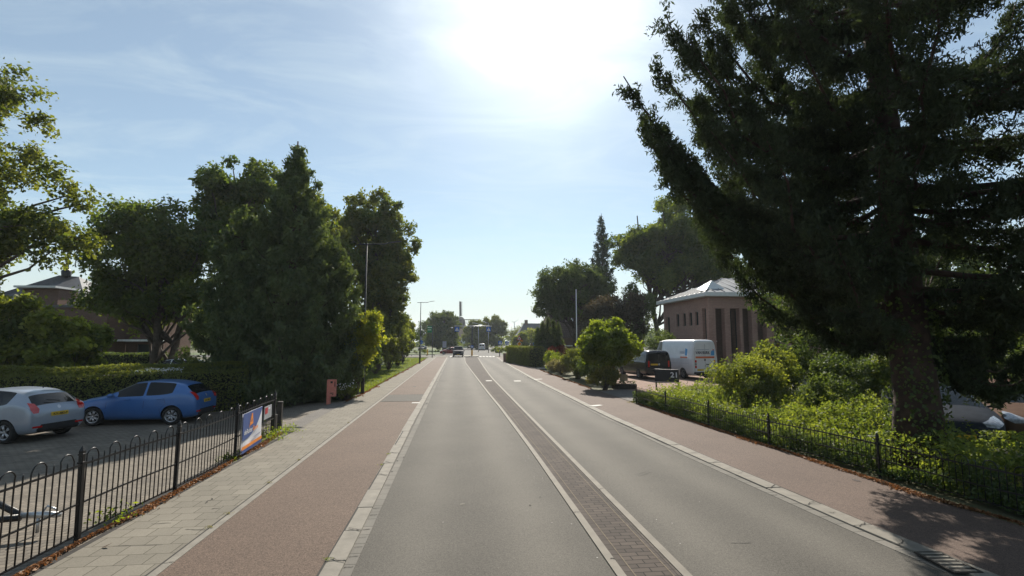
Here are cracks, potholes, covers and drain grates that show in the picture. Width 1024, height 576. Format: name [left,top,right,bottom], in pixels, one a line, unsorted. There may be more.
drain grate [914,551,984,574]
